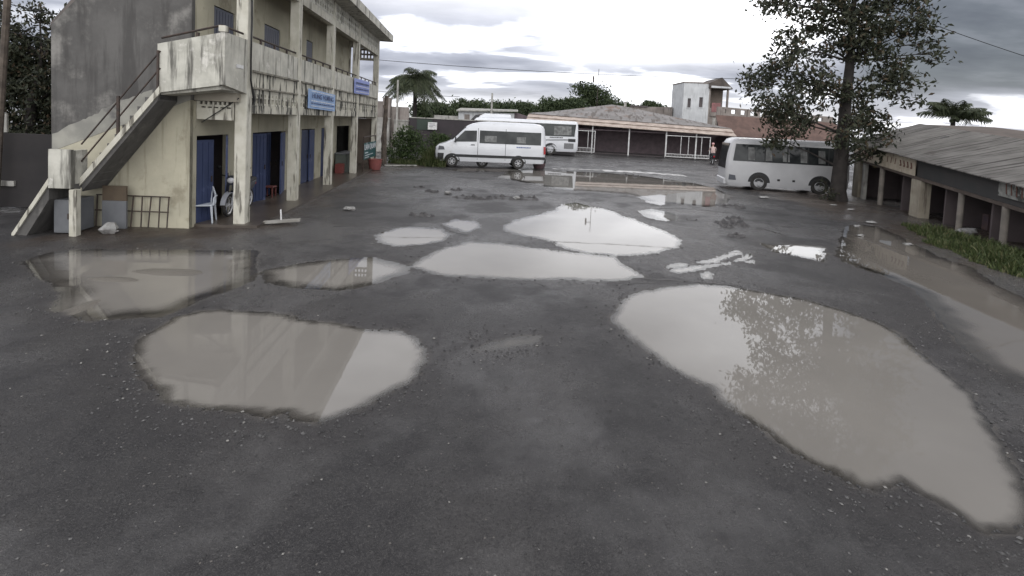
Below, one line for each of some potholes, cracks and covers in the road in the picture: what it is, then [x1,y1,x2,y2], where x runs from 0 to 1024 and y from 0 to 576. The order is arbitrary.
pothole [656,250,763,276]
pothole [827,223,1024,389]
pothole [5,245,270,328]
pothole [255,254,418,294]
pothole [495,201,690,259]
pothole [461,328,553,359]
pothole [746,240,837,266]
pothole [109,303,442,435]
pothole [596,280,1024,552]
pothole [436,217,488,235]
pothole [367,225,459,249]
pothole [406,238,660,286]
